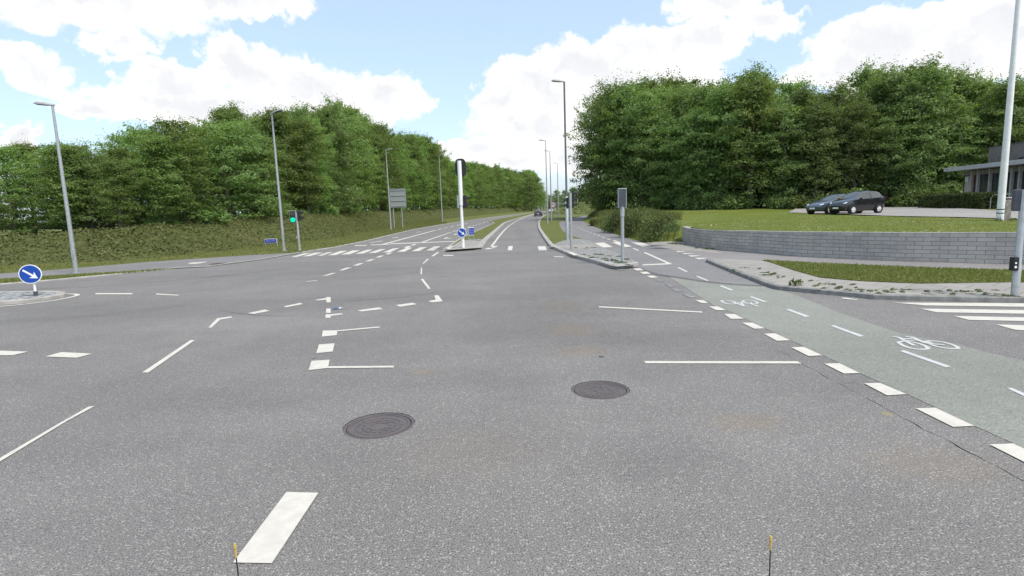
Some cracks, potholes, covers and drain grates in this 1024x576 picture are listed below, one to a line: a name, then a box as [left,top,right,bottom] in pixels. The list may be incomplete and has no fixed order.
manhole cover [571,381,630,399]
manhole cover [343,412,415,440]
